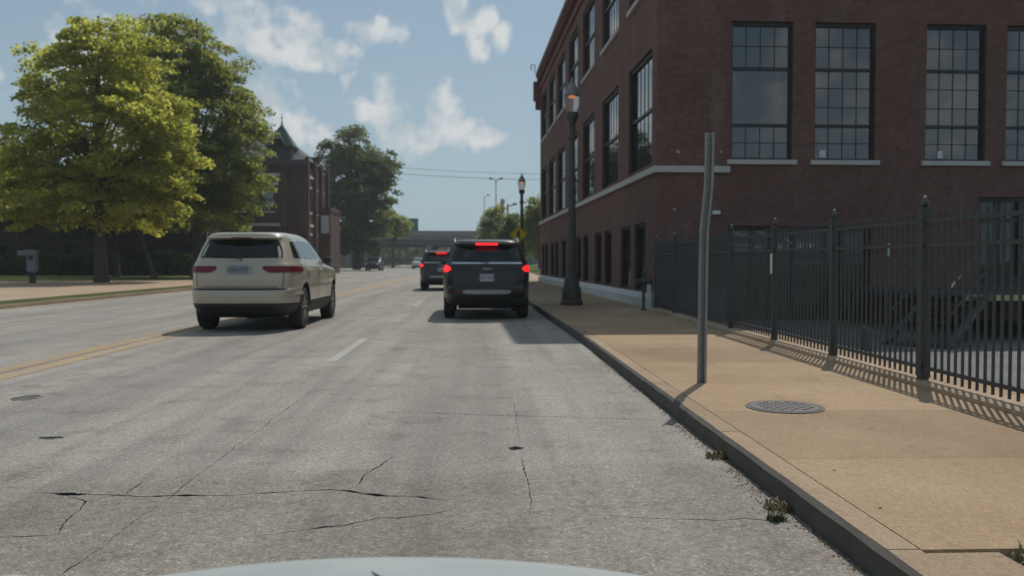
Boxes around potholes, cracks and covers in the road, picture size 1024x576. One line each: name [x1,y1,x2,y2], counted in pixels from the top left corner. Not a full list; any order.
crack [15,398,455,575]
crack [614,515,792,523]
manhole cover [745,400,825,414]
crack [514,403,533,513]
